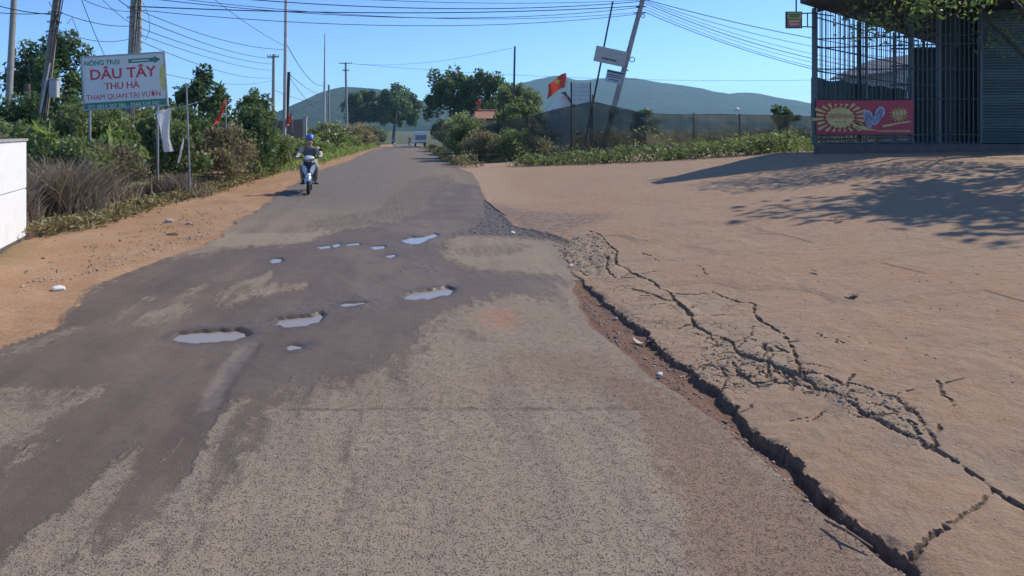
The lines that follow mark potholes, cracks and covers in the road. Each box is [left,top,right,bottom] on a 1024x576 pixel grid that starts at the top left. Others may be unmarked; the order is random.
crack [554,231,1024,576]
pothole [271,310,328,327]
pothole [401,232,441,244]
pothole [170,326,256,344]
pothole [401,285,458,300]
pothole [282,342,313,351]
